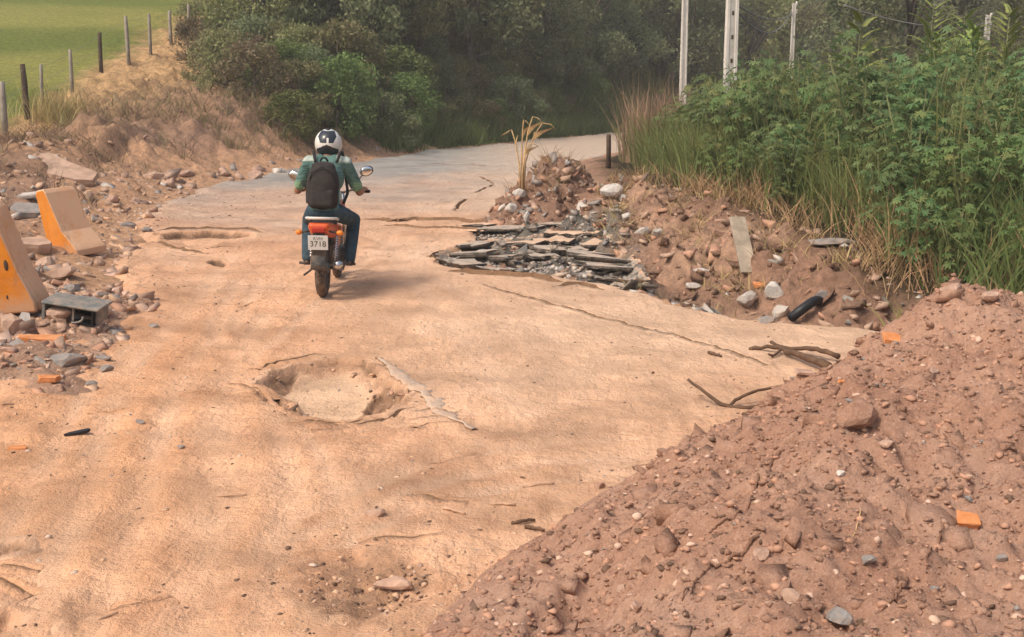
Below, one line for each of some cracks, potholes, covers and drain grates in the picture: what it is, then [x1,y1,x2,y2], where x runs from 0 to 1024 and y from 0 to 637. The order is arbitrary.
crack [177,352,486,466]
pothole [428,234,650,285]
pothole [152,230,258,249]
pothole [199,258,234,269]
pothole [248,355,417,422]
crack [440,268,775,366]
crack [360,163,502,232]
